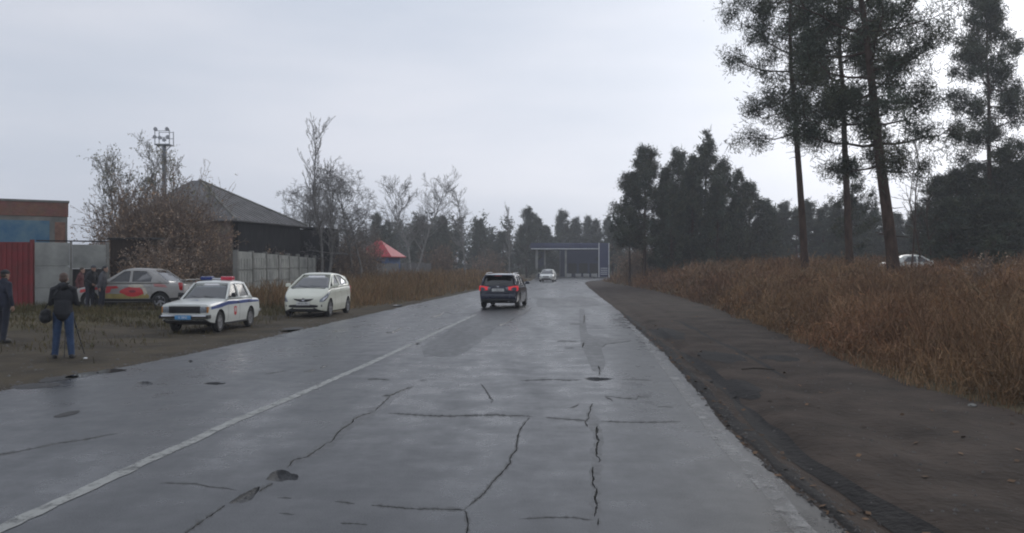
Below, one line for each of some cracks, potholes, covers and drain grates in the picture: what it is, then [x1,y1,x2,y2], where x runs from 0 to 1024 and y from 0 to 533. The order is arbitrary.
crack [259,378,681,533]
crack [0,433,118,456]
pothole [267,470,299,482]
crack [161,482,235,533]
